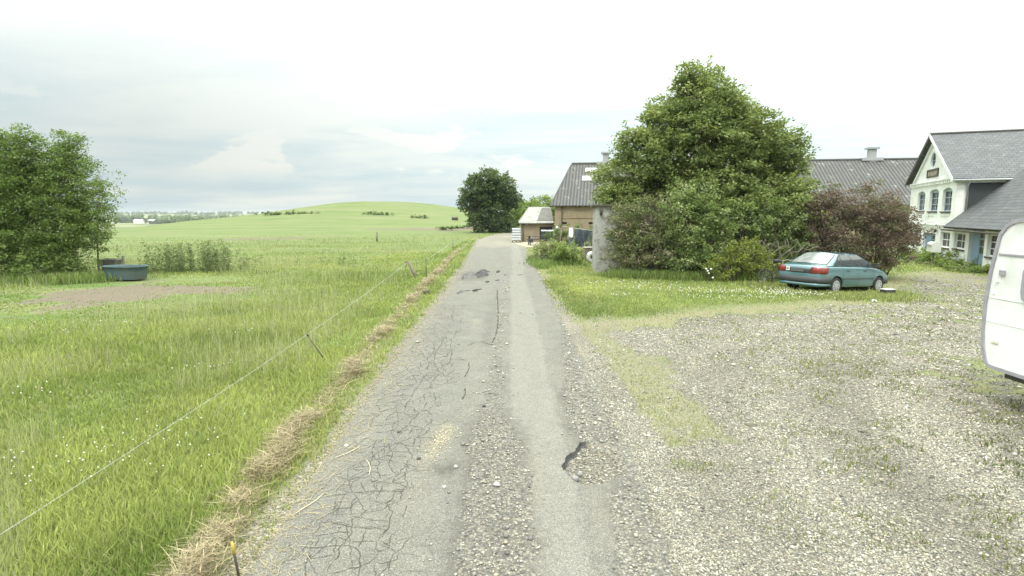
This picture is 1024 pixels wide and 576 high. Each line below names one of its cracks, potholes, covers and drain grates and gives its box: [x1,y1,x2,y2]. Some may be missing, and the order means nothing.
pothole [561,442,628,485]
crack [270,305,474,576]
